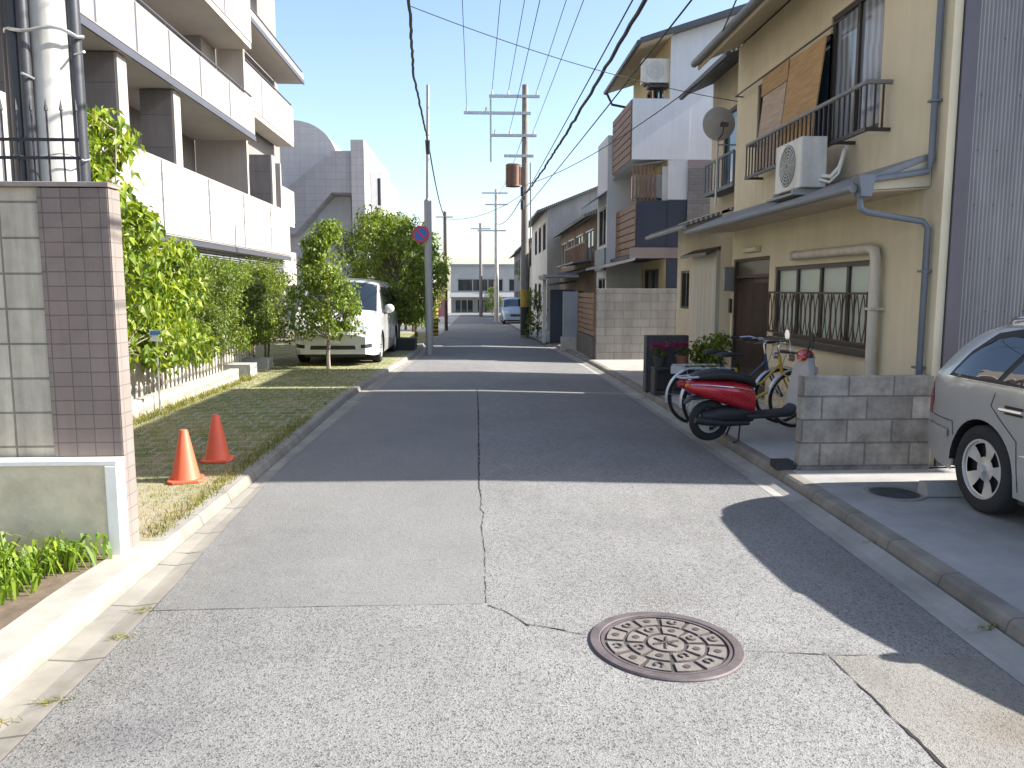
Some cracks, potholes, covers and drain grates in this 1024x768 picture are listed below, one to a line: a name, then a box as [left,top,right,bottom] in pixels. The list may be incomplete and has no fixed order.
manhole cover [862,485,928,502]
crack [151,392,586,635]
crack [748,650,947,768]
manhole cover [589,612,746,683]
